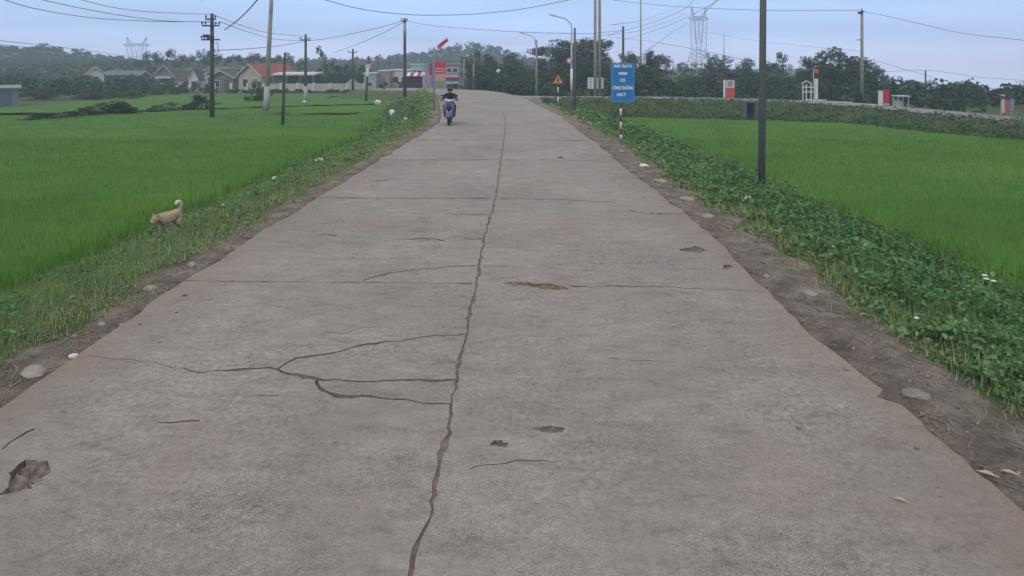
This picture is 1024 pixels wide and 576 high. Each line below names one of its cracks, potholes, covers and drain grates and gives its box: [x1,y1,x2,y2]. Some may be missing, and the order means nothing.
pothole [501,282,568,290]
crack [105,113,559,576]
pothole [0,460,51,495]
crack [2,429,34,449]
